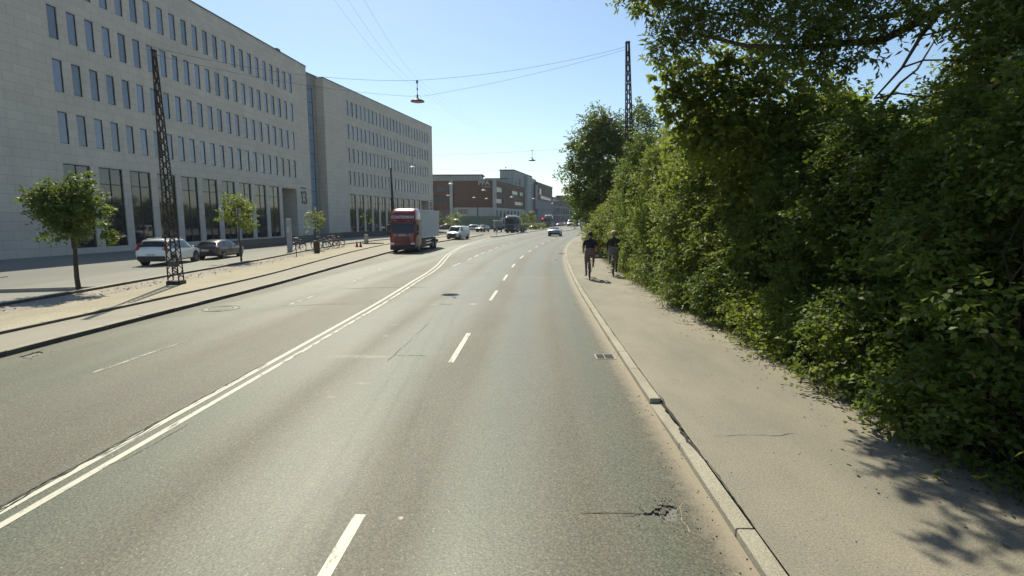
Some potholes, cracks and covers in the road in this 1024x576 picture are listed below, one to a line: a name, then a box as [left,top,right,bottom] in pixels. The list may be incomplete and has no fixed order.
pothole [639,486,714,539]
